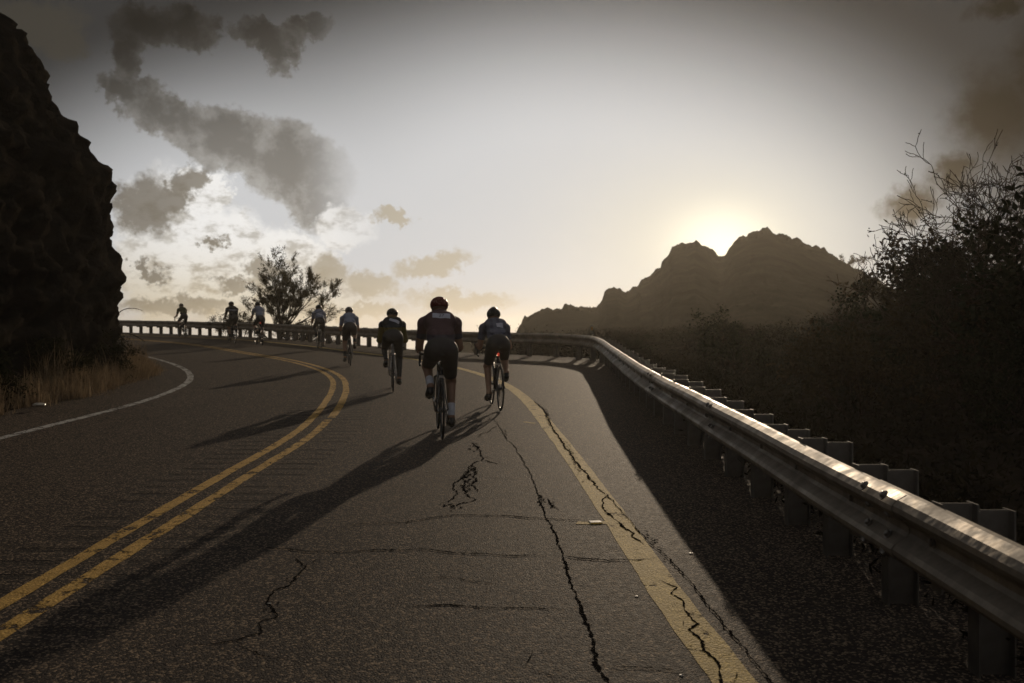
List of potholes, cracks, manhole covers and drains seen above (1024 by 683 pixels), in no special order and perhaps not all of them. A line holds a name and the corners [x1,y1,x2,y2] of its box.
crack [605,581,738,683]
crack [187,401,657,659]
